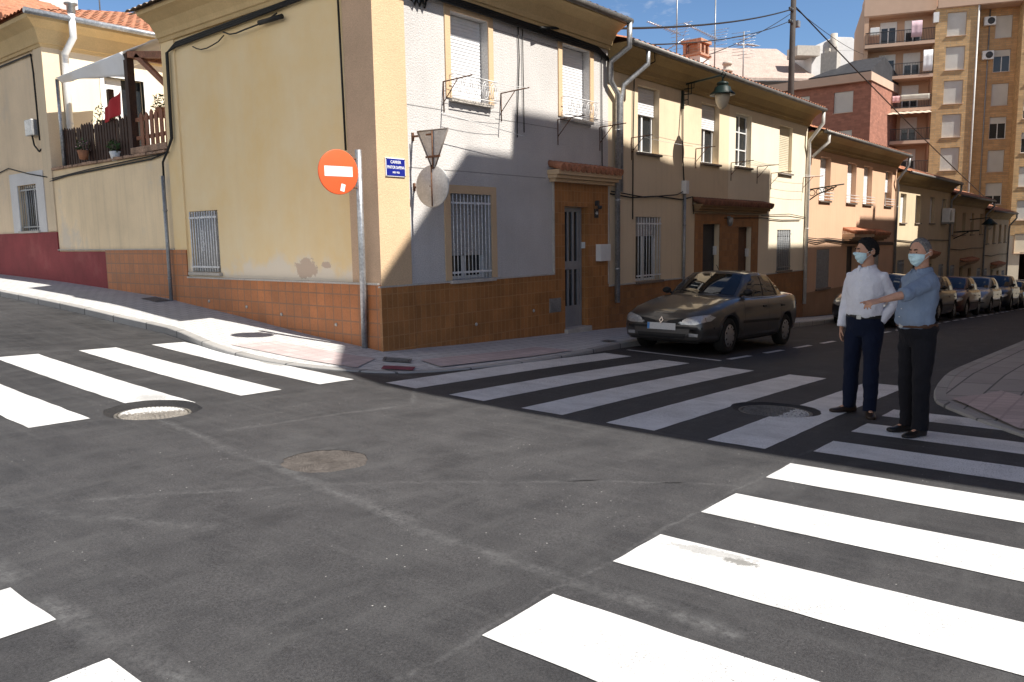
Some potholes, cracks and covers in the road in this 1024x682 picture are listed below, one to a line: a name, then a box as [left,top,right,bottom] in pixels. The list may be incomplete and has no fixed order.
manhole cover [103,400,202,420]
manhole cover [732,402,821,418]
manhole cover [281,450,368,473]
